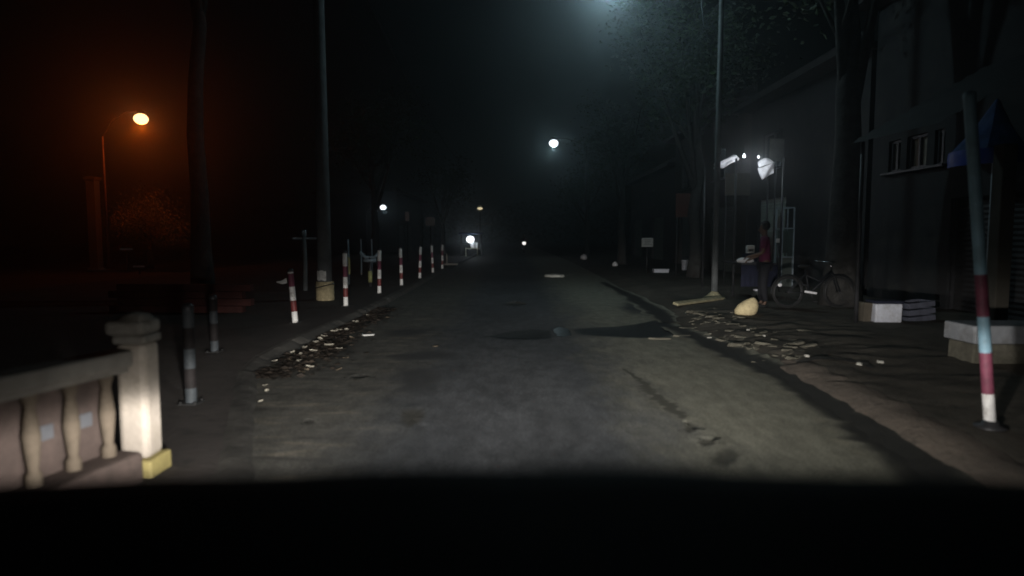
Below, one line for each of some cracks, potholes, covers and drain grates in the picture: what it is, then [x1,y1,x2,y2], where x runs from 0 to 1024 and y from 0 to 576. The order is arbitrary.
crack [622,369,693,419]
